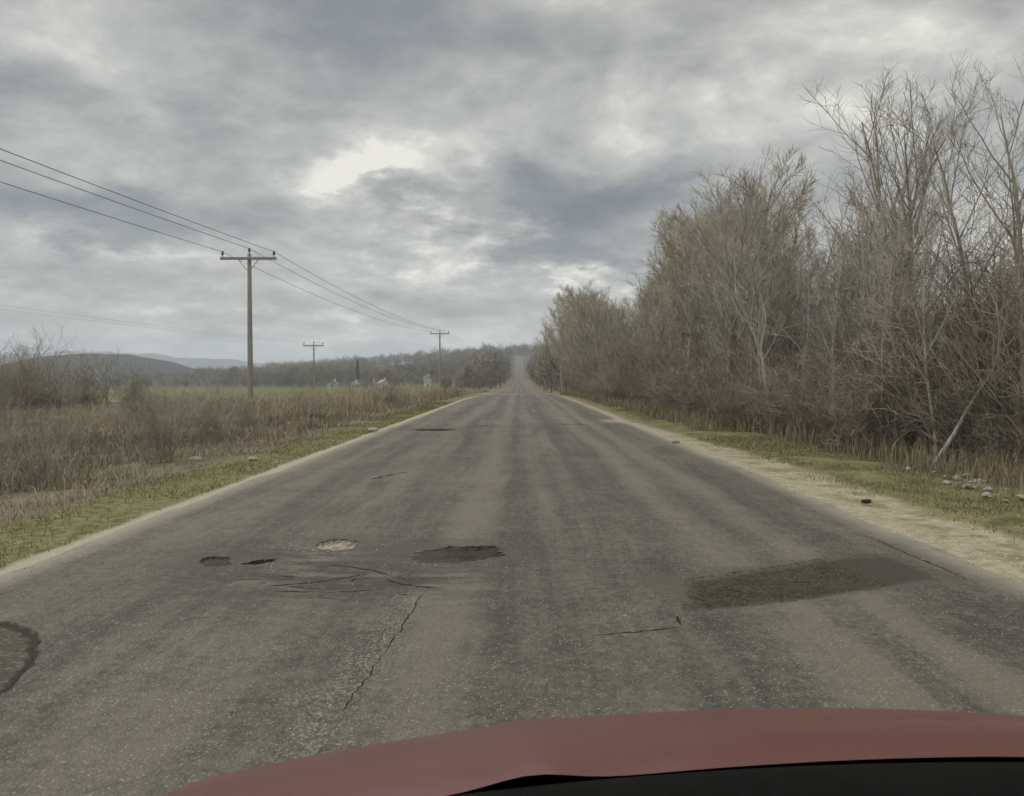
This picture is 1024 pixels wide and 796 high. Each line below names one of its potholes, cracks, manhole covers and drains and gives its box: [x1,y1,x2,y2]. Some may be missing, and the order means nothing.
pothole [200,556,232,567]
crack [241,565,437,711]
crack [867,536,975,583]
pothole [411,545,506,563]
